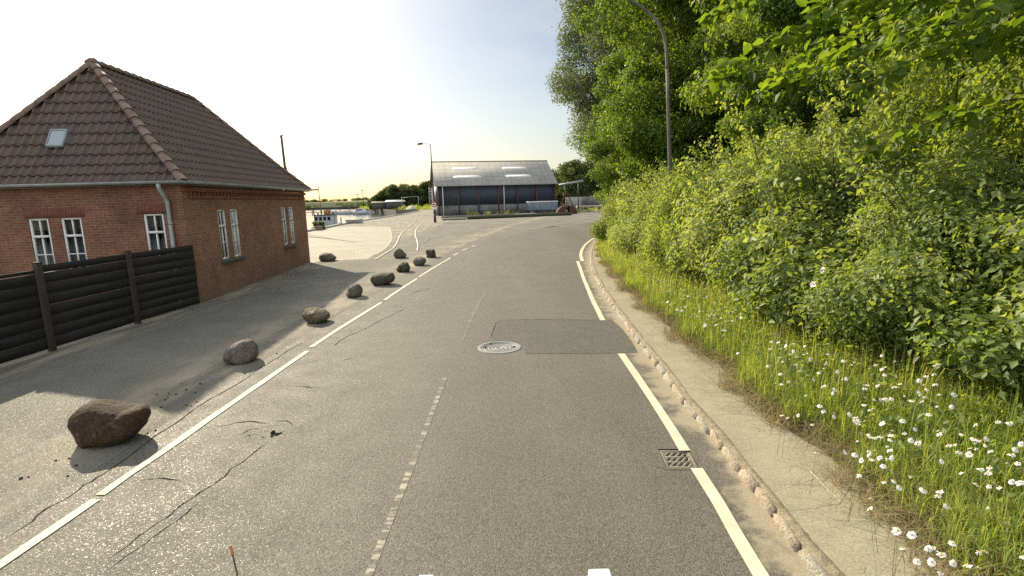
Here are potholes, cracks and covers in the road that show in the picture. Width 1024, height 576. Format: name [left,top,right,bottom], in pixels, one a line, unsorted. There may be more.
crack [335,288,430,360]
manhole cover [478,341,522,354]
drain grate [659,450,698,467]
crack [2,341,306,571]
